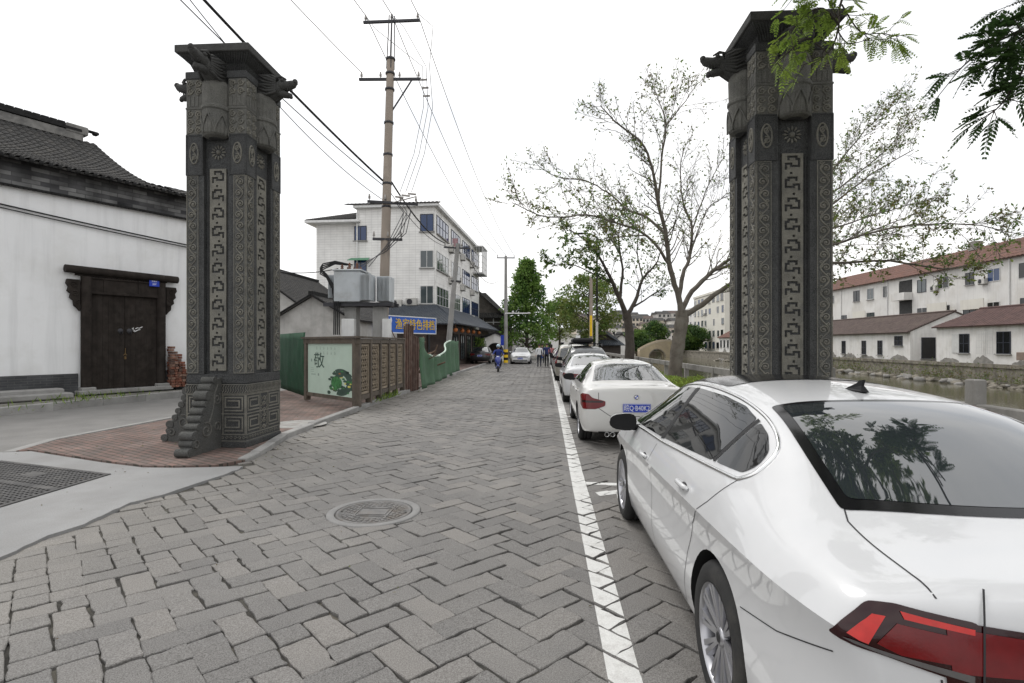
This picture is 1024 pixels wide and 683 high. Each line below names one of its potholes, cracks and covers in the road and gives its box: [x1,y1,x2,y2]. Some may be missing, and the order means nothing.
drain grate [0,460,111,508]
manhole cover [326,498,420,528]
